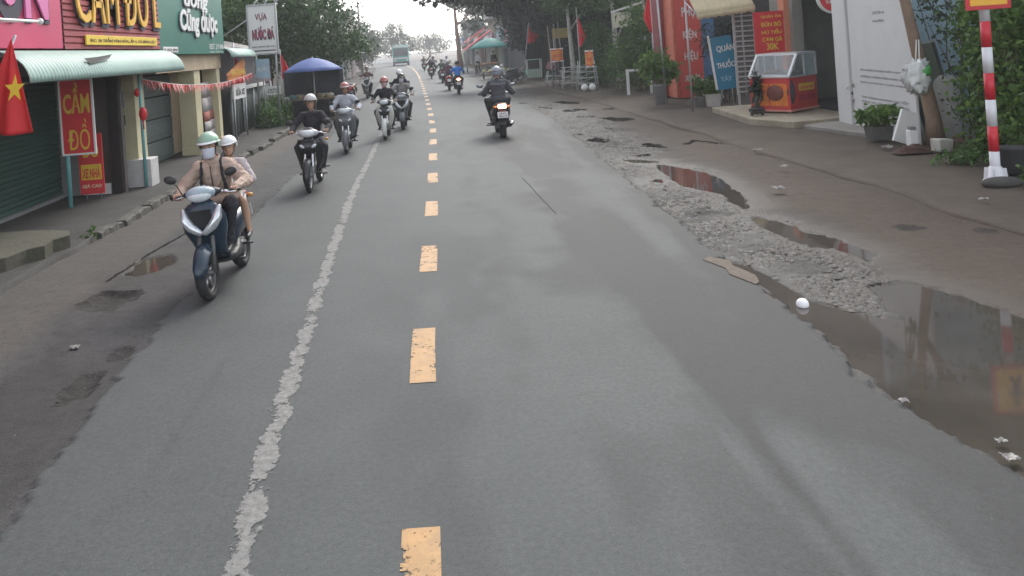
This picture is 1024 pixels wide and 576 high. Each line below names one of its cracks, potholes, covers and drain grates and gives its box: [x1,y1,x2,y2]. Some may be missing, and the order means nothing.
pothole [718,256,1024,481]
pothole [73,289,148,313]
pothole [50,370,109,408]
crack [521,177,557,214]
pothole [749,214,882,262]
pothole [654,163,753,210]
pothole [114,253,180,279]
pothole [105,345,137,363]
